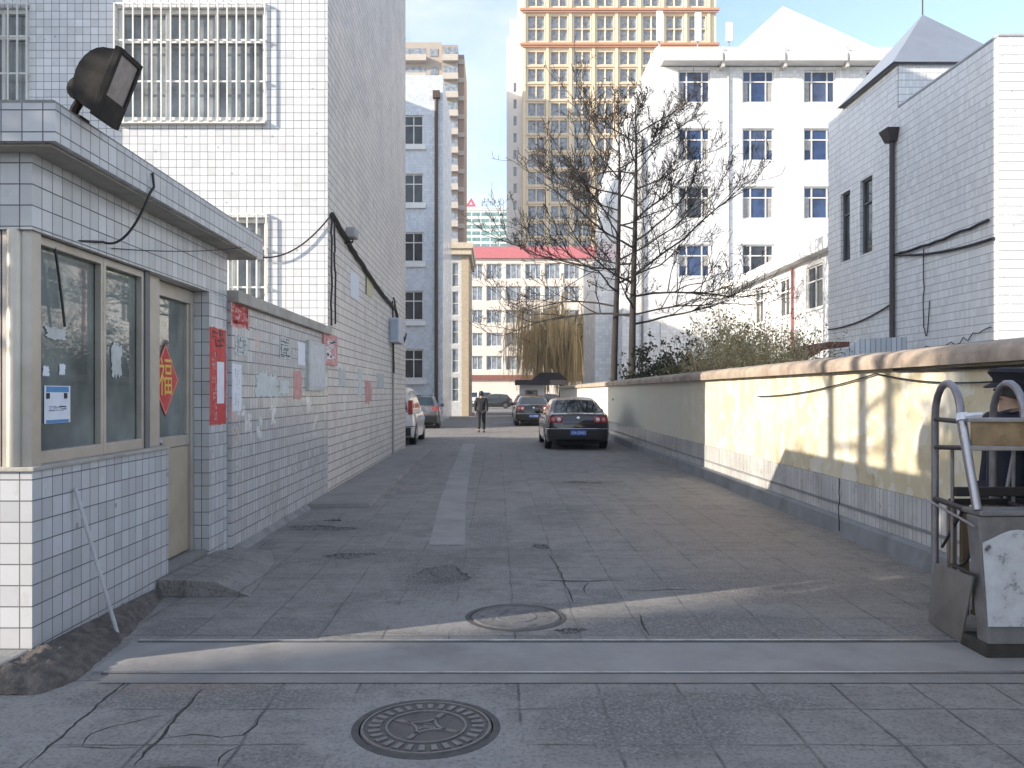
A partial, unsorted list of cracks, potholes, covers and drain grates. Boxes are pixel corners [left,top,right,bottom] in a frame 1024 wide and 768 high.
crack [27,683,260,767]
pothole [405,565,472,586]
crack [542,555,685,603]
manhole cover [351,699,500,760]
manhole cover [465,604,566,632]
